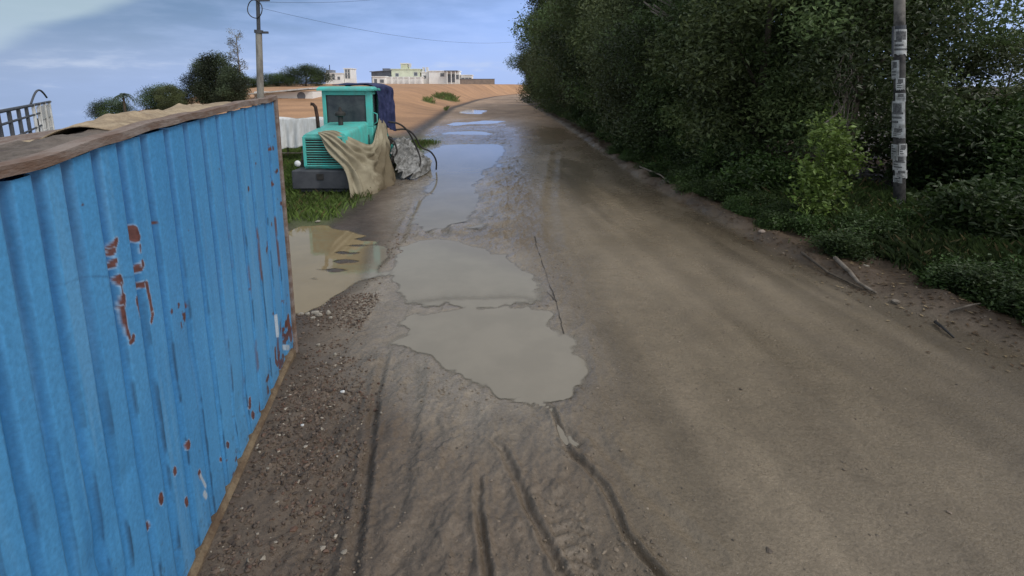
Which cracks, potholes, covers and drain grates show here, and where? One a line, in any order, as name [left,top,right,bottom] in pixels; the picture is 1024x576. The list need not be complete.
pothole [363,236,555,309]
pothole [372,297,601,414]
crack [534,236,574,338]
